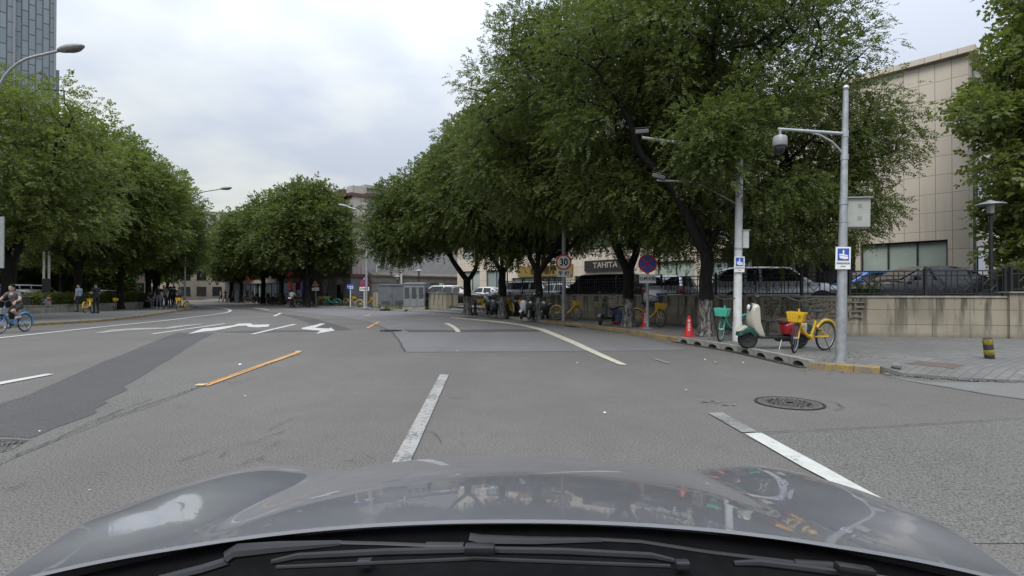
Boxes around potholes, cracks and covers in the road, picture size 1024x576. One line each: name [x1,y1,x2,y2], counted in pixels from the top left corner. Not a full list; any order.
manhole cover [754,396,826,411]
